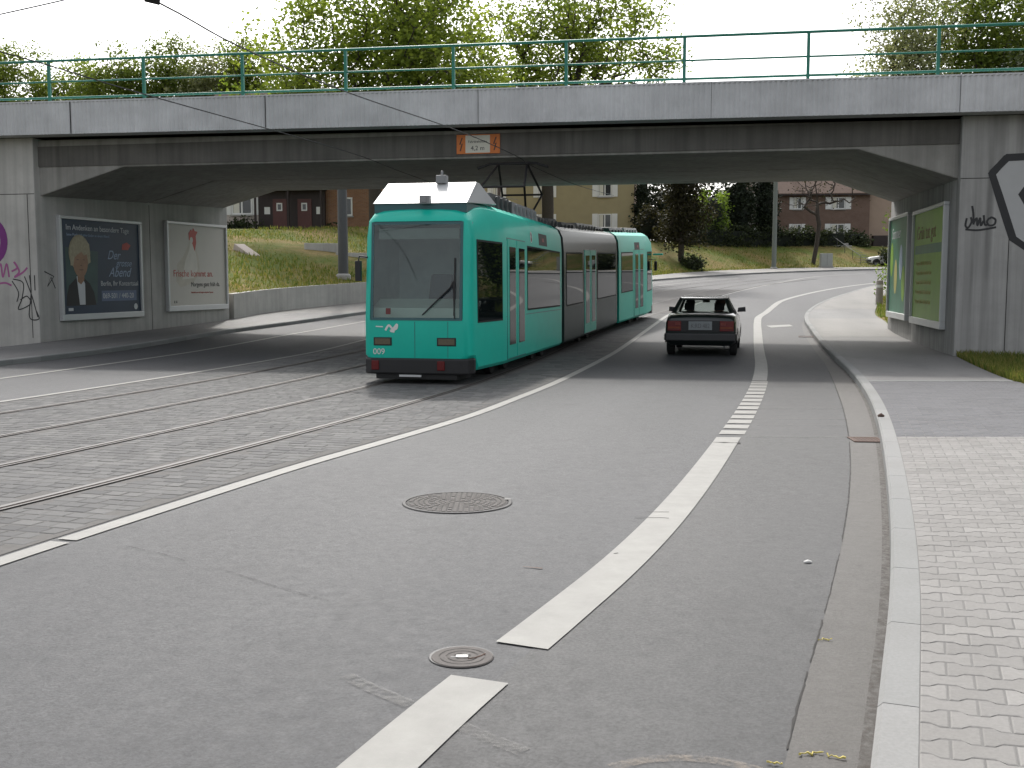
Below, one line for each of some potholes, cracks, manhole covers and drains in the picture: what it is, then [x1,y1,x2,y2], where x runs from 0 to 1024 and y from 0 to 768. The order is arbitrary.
manhole cover [429,646,494,668]
manhole cover [402,492,512,514]
